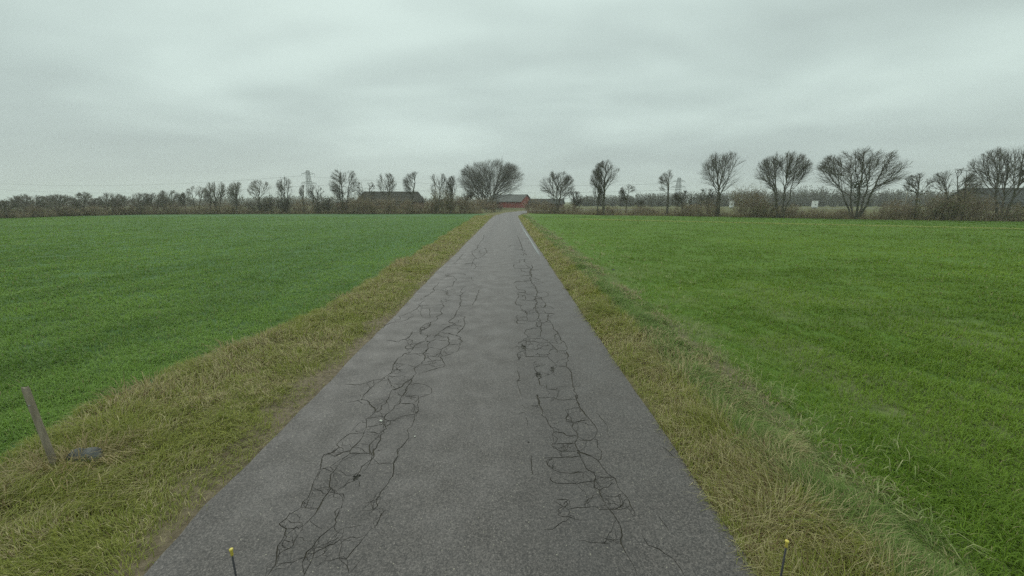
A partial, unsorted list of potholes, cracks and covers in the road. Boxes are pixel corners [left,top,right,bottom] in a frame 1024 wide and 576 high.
crack [510,237,685,576]
crack [266,239,487,575]
